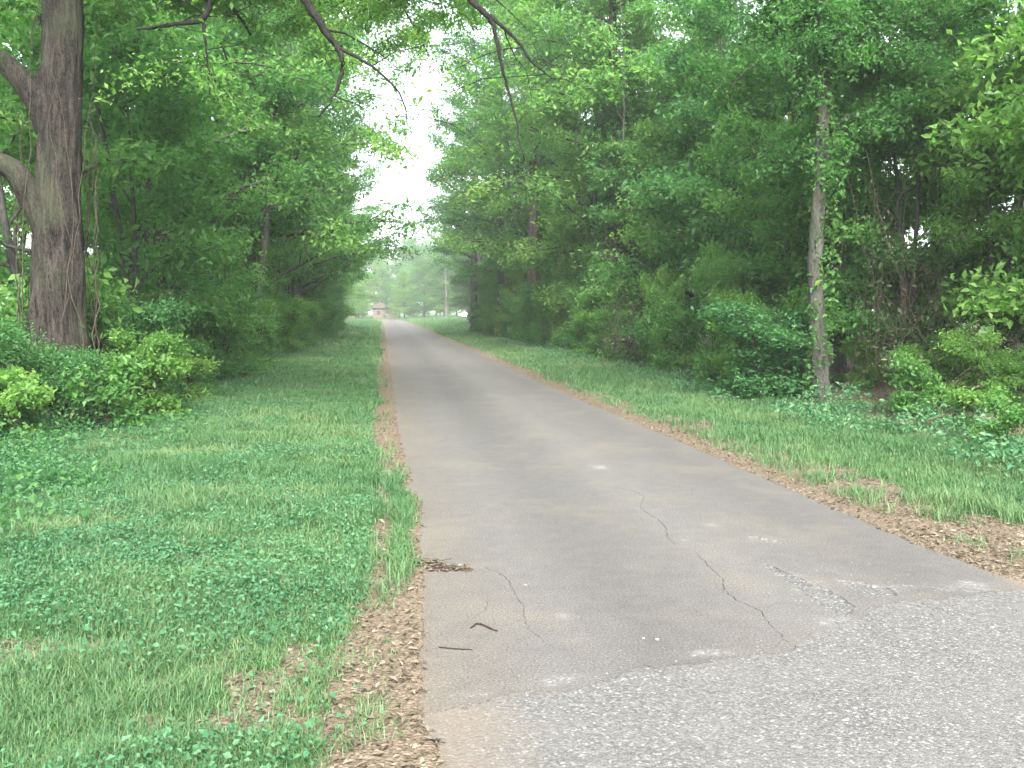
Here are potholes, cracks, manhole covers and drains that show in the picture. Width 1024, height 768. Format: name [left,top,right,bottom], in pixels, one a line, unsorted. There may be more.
pothole [762,563,856,614]
crack [698,554,798,648]
